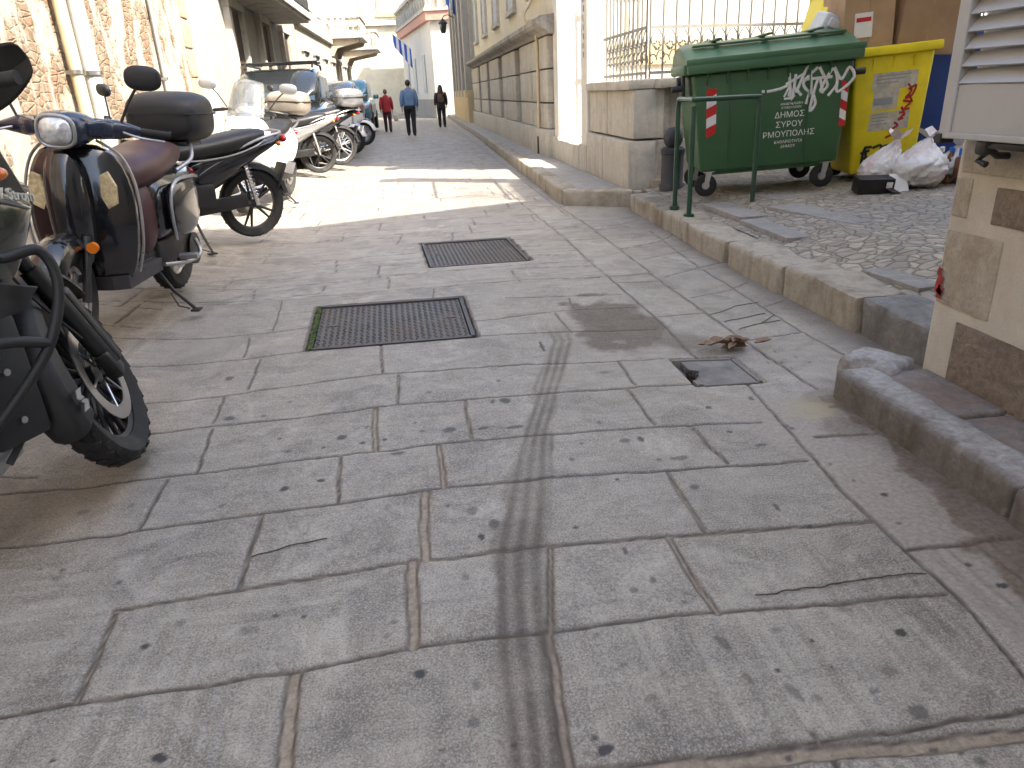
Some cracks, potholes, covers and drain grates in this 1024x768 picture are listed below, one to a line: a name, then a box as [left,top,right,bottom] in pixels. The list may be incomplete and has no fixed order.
crack [251,538,327,557]
crack [755,573,927,596]
manhole cover [422,238,530,268]
manhole cover [307,297,476,351]
crack [710,302,780,330]
